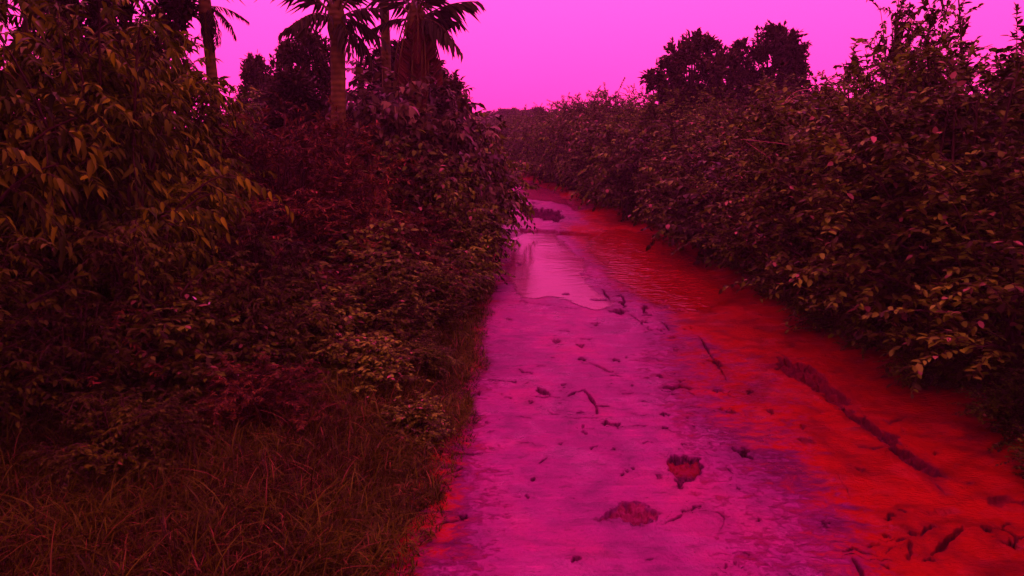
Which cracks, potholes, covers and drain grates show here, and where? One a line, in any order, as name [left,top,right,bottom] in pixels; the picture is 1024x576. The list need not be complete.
pothole [656,449,714,495]
pothole [582,495,672,535]
